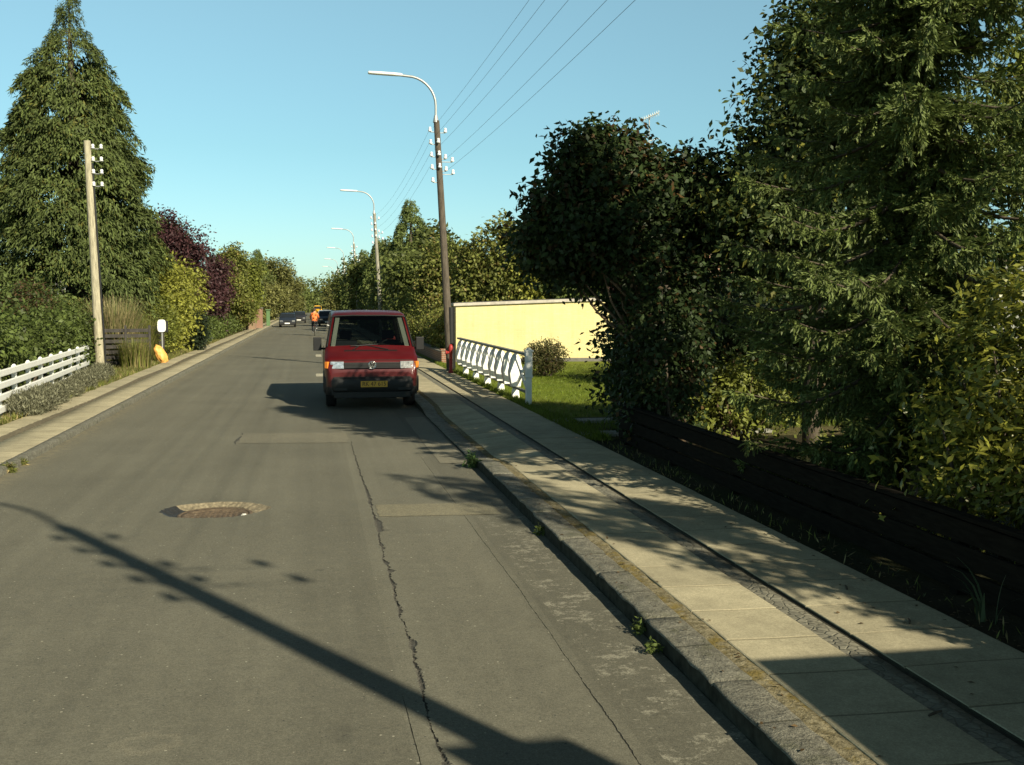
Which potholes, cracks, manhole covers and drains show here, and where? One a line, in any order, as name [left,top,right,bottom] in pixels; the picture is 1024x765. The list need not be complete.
manhole cover [159,502,272,518]
crack [351,441,453,765]
